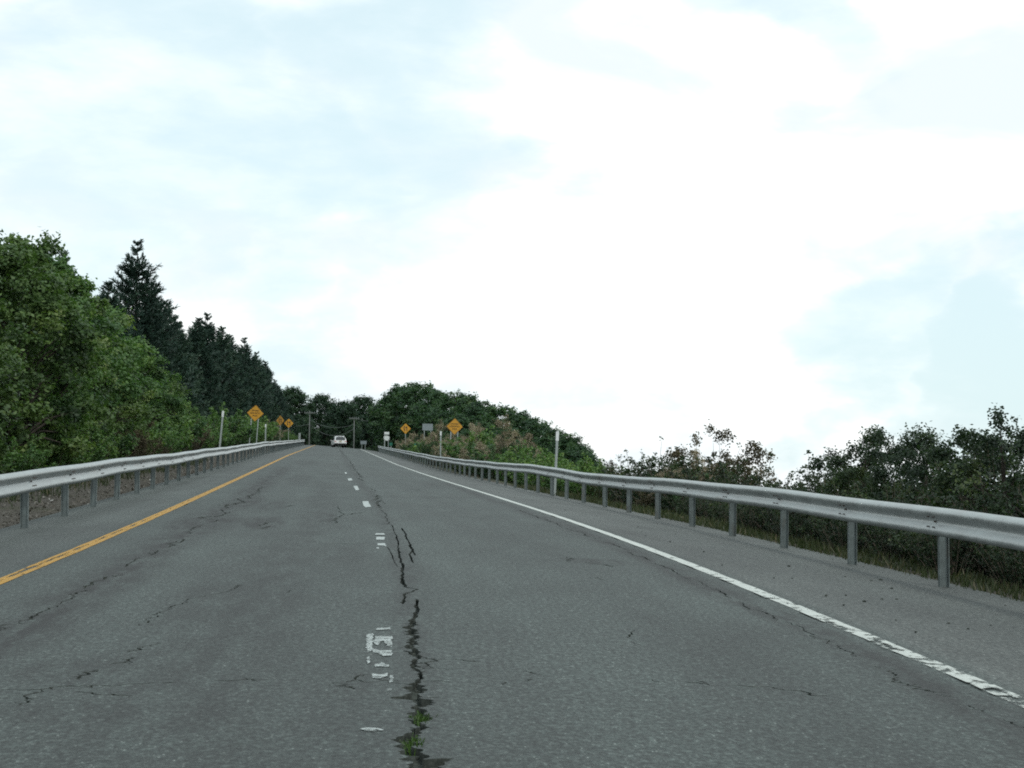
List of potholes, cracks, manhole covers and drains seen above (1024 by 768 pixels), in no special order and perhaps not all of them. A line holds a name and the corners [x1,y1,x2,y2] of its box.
crack [329,674,400,689]
crack [2,643,266,705]
crack [0,487,263,630]
